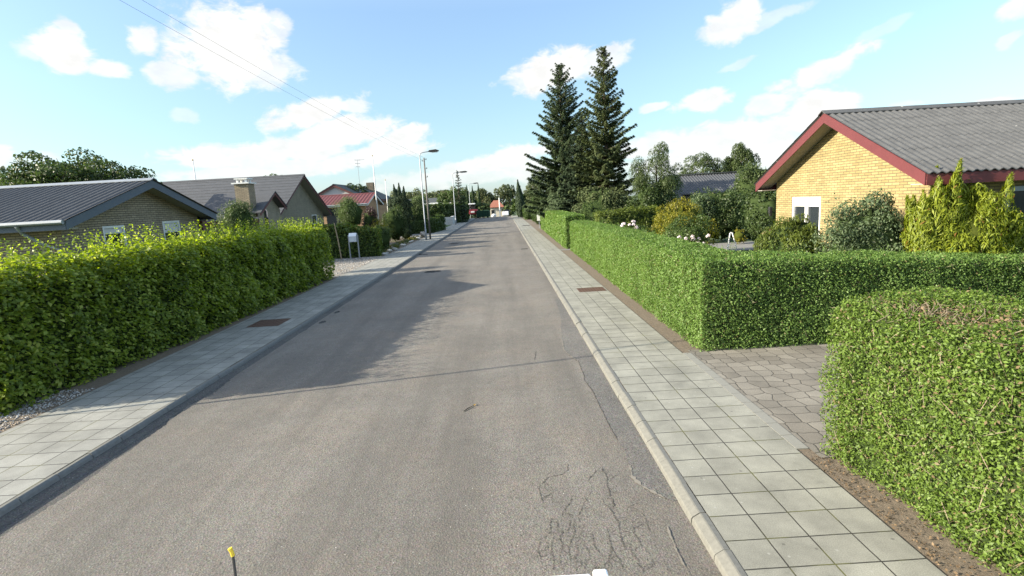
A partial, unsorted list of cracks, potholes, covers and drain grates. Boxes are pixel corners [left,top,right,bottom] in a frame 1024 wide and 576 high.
crack [537,463,653,570]
utility cover [246,318,291,328]
